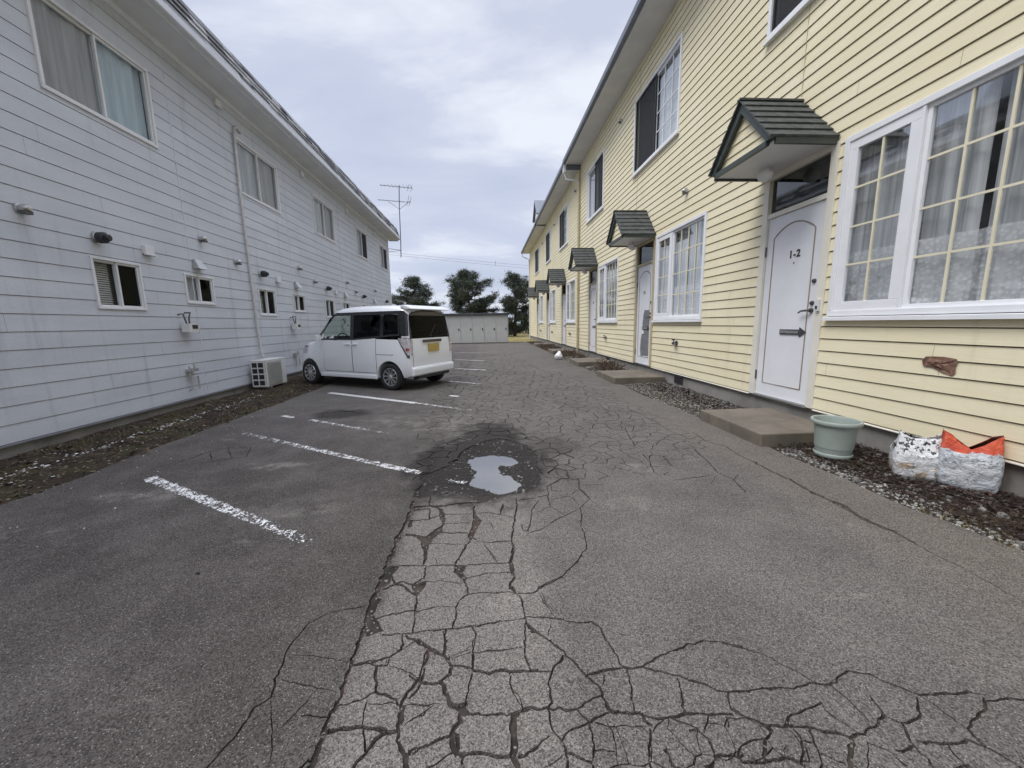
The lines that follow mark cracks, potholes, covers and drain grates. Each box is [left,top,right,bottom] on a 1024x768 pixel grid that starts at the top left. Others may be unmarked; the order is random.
crack [206,353,1024,768]
crack [181,441,272,464]
pothole [413,438,541,503]
